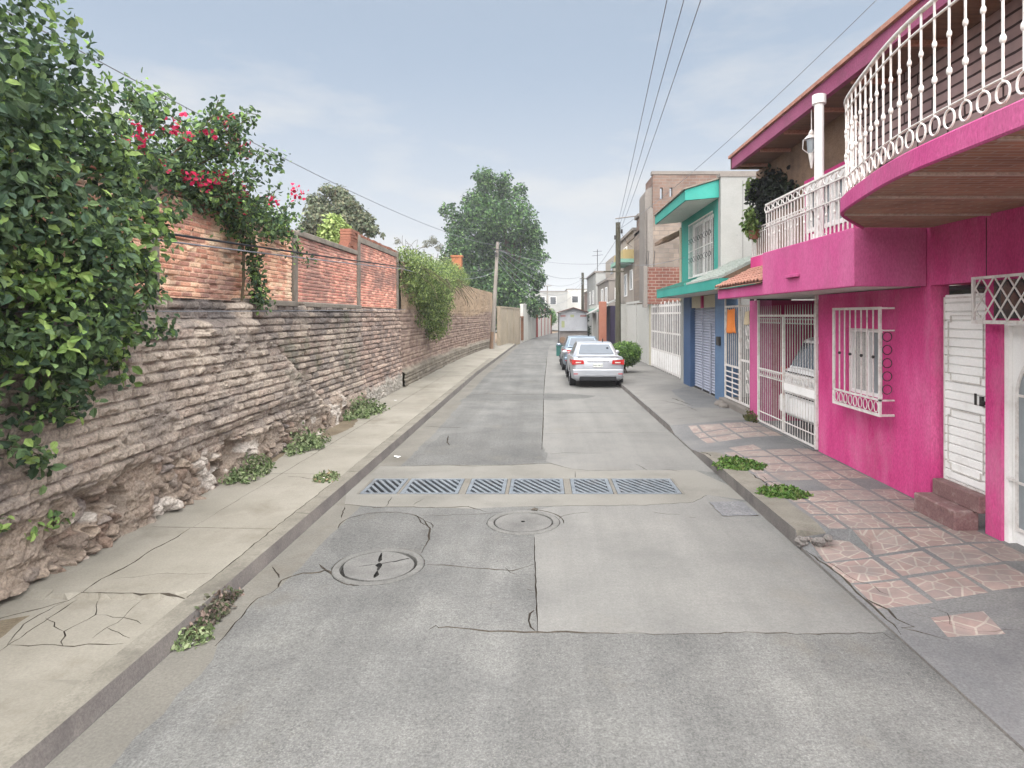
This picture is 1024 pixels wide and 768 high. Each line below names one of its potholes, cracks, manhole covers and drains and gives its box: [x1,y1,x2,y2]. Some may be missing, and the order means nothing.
drain grate [611,479,682,494]
crack [0,394,1012,647]
drain grate [400,479,465,494]
manhole cover [487,510,559,535]
drain grate [570,479,614,494]
drain grate [360,479,408,494]
drain grate [466,479,508,494]
manhole cover [332,548,424,586]
drain grate [509,479,565,494]
